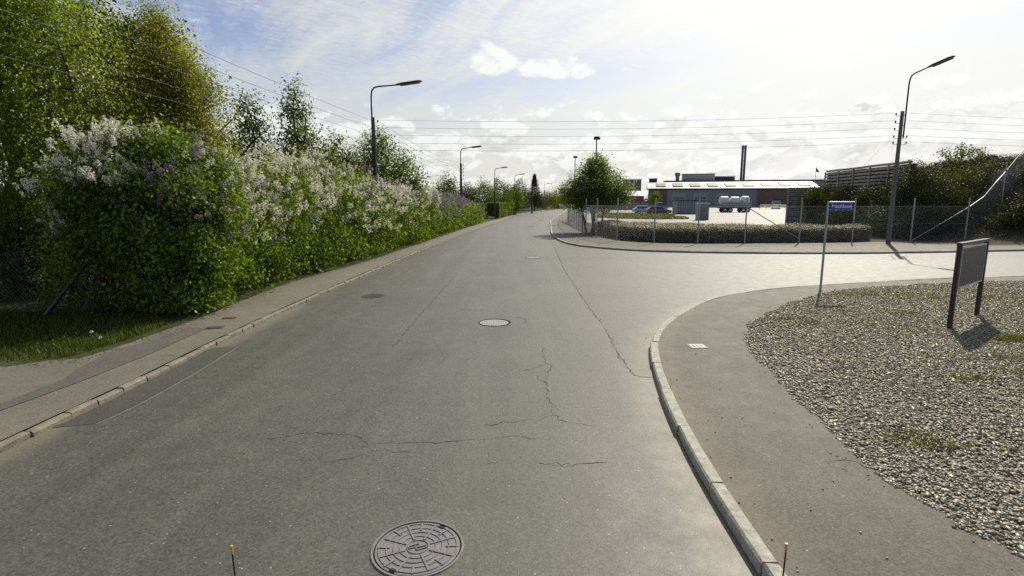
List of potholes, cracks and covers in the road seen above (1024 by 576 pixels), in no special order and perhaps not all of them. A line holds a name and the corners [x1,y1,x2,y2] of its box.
crack [272,349,590,462]
manhole cover [370,520,464,576]
